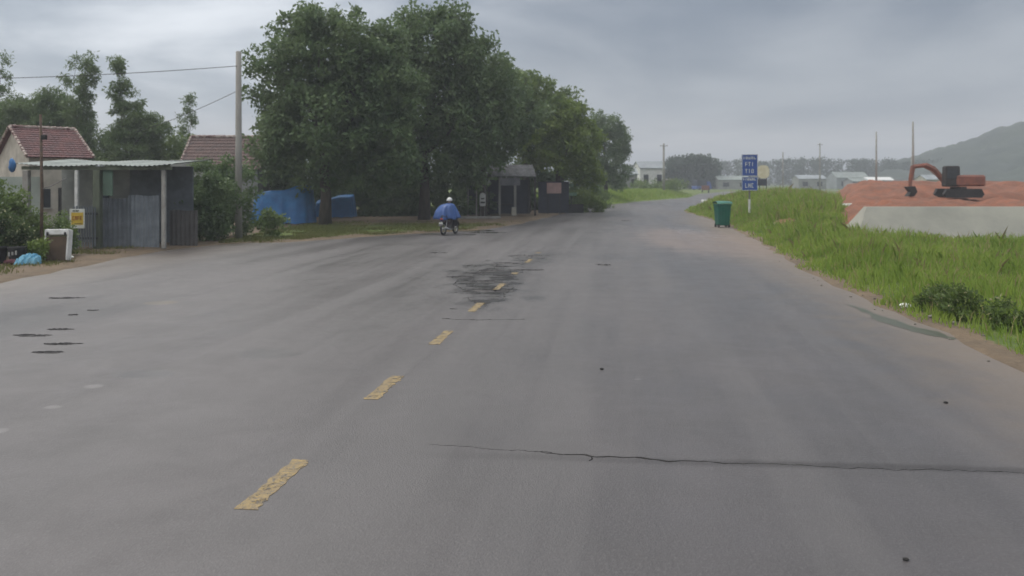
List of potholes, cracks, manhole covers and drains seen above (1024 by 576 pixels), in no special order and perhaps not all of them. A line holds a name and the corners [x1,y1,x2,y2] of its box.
crack [433,444,1018,473]
